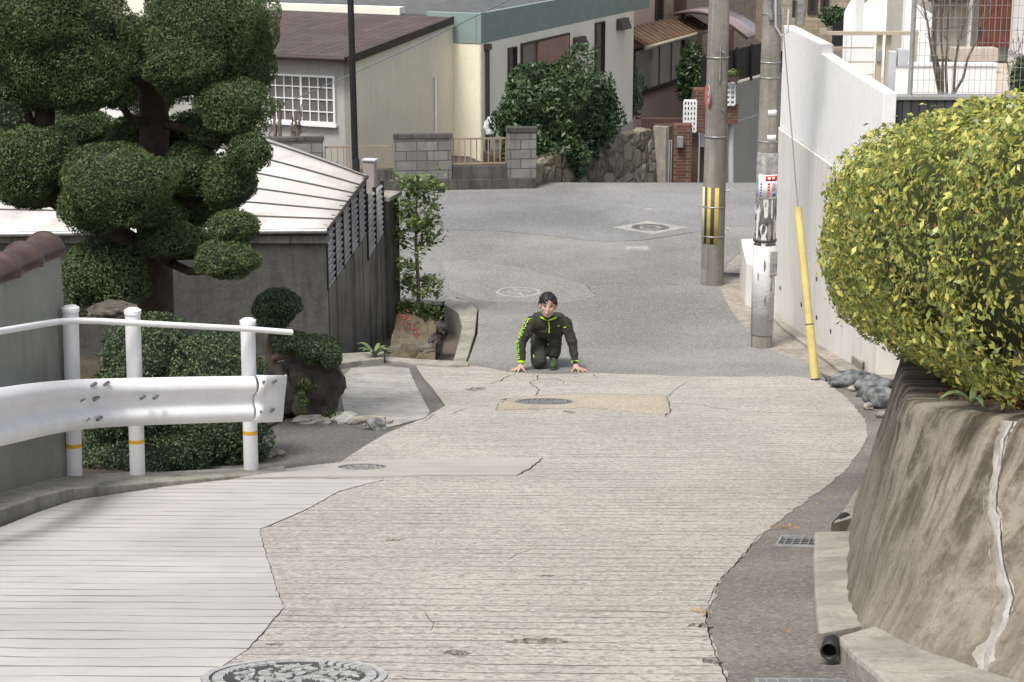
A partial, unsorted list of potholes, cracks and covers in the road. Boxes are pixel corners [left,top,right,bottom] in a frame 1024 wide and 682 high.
manhole cover [201,658,387,682]
drain grate [775,535,814,547]
crack [521,457,663,474]
manhole cover [614,221,687,234]
crack [491,374,640,408]
manhole cover [496,287,541,297]
